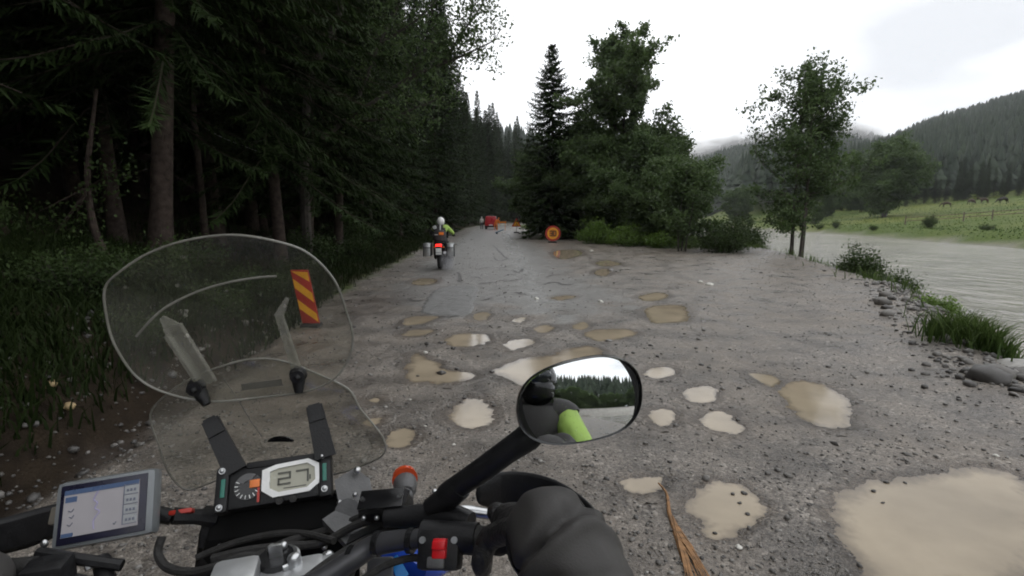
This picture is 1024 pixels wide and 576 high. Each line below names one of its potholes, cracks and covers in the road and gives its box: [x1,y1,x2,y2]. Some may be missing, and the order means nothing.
pothole [660,471,795,553]
pothole [667,380,732,409]
pothole [806,457,1024,576]
pothole [392,350,489,388]
pothole [635,362,687,382]
pothole [636,403,689,432]
pothole [684,405,764,440]
pothole [634,303,702,326]
pothole [432,330,501,350]
